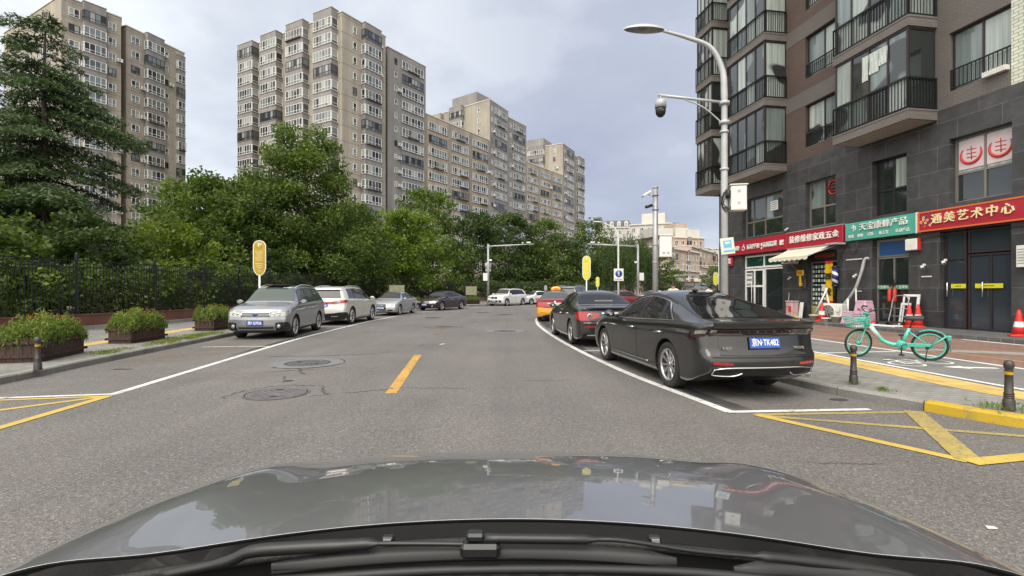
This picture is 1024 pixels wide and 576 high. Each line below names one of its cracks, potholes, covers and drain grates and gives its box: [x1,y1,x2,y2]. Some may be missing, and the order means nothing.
crack [222,369,391,398]
manhole cover [241,387,310,400]
manhole cover [269,358,345,368]
